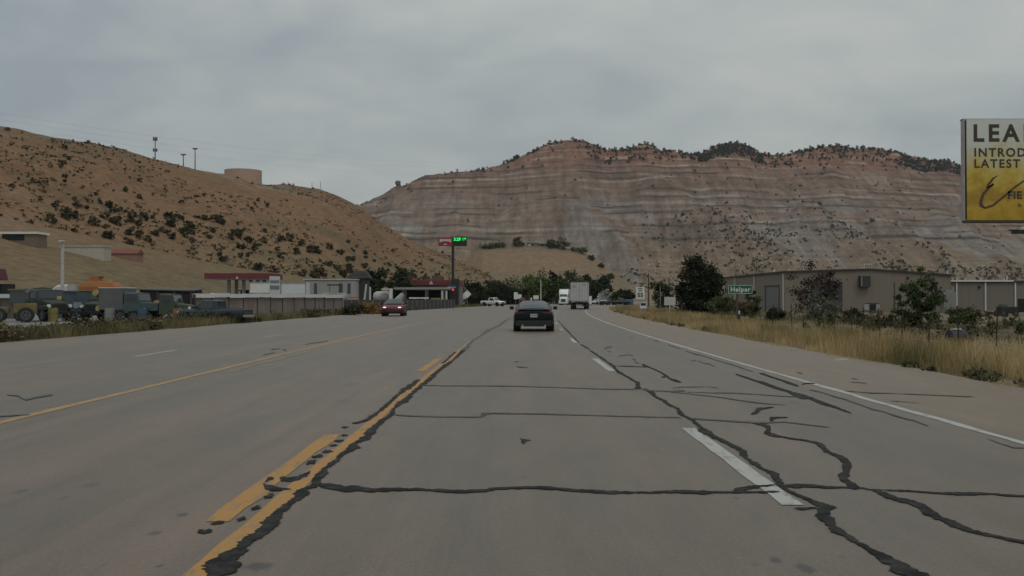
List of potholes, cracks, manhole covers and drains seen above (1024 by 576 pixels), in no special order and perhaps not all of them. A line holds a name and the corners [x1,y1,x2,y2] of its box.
crack [425,385,796,405]
crack [2,394,53,416]
crack [844,378,975,403]
